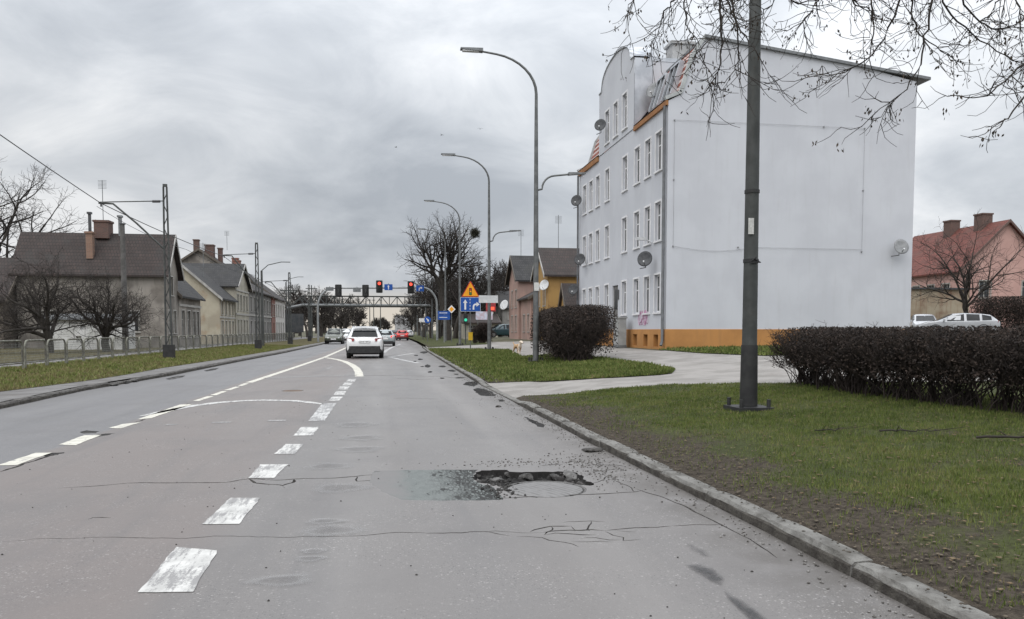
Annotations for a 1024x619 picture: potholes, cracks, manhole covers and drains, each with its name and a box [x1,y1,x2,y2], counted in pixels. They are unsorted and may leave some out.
pothole [473,470,594,487]
manhole cover [506,481,587,498]
crack [2,521,721,546]
crack [65,470,643,501]
